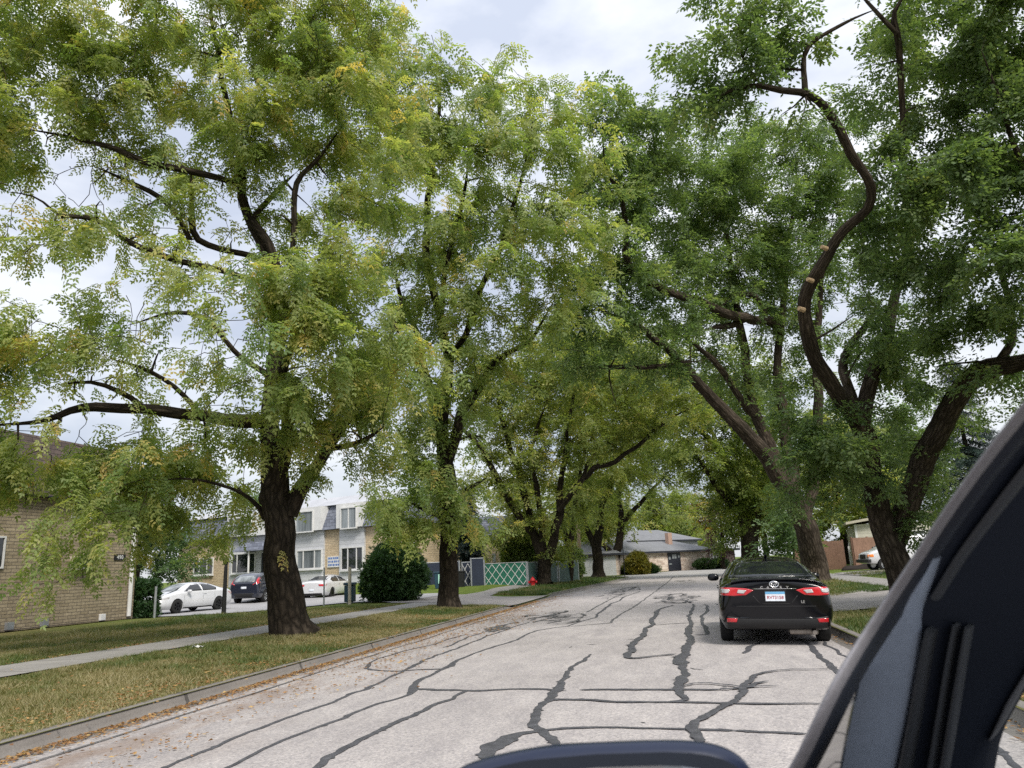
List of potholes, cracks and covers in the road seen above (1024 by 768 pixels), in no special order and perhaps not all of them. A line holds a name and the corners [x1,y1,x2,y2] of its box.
crack [484,576,700,632]
